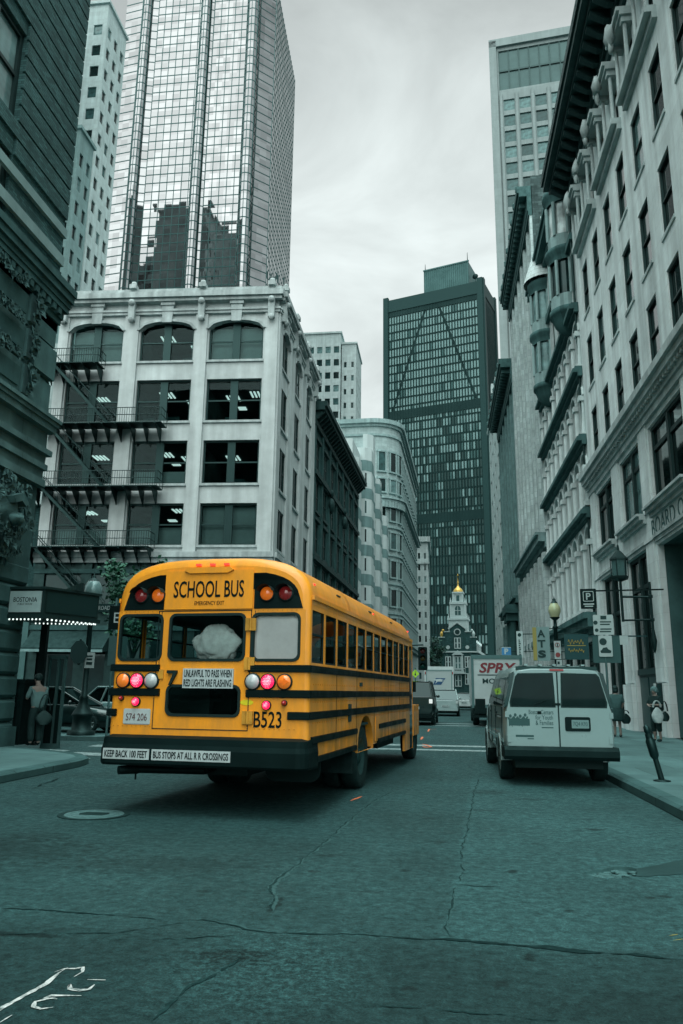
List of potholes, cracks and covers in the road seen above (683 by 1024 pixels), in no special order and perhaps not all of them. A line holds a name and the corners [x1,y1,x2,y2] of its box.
crack [3,792,683,960]
crack [153,957,242,1019]
manhole cover [57,809,130,820]
